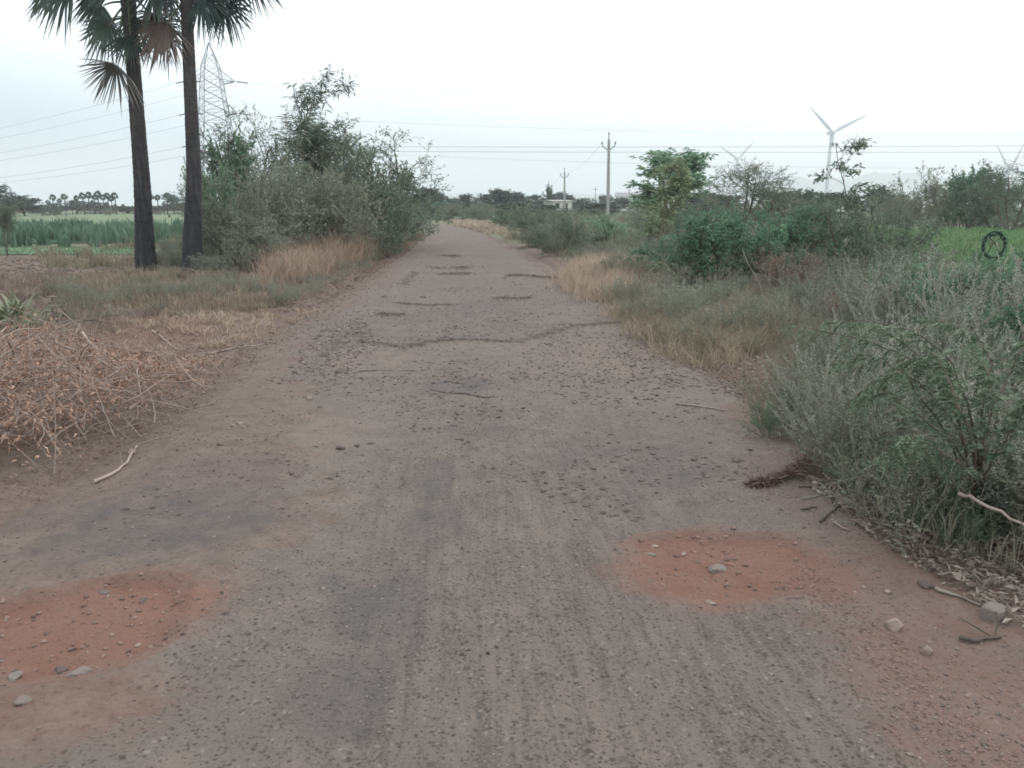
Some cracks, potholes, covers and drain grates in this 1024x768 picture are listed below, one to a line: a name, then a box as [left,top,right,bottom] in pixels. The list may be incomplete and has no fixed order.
pothole [0,570,198,687]
crack [428,389,497,398]
pothole [622,528,834,609]
